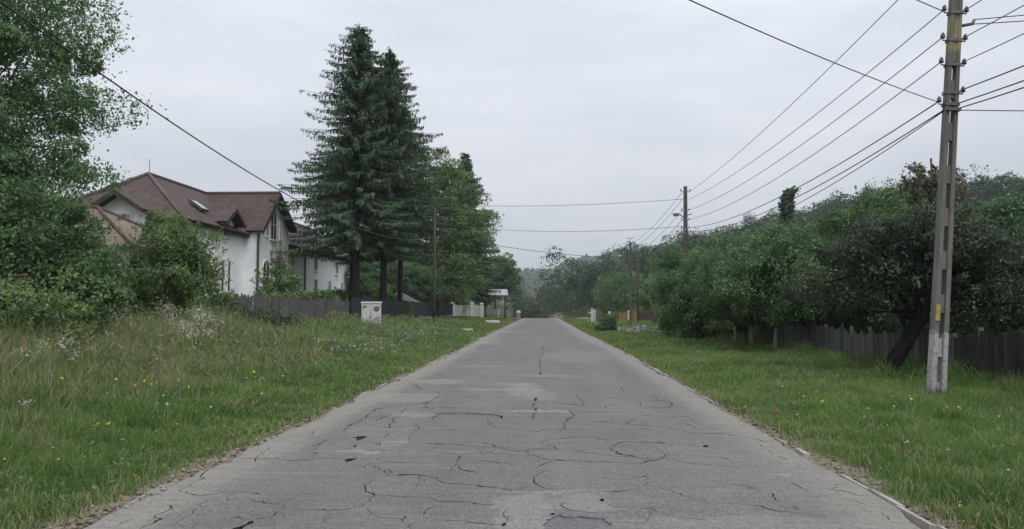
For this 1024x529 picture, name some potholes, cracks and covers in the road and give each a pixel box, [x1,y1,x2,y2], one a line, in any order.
crack [119,346,890,529]
